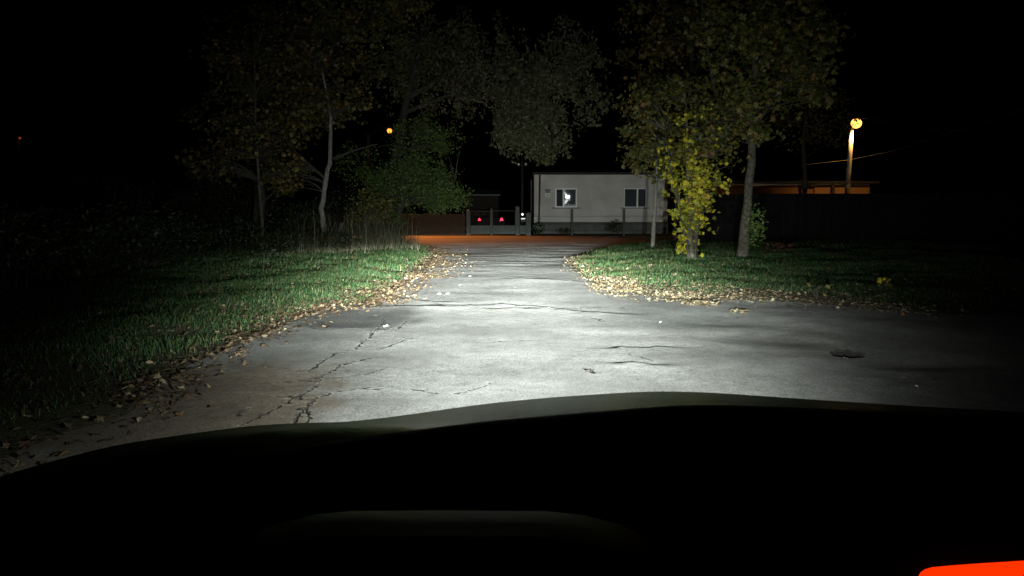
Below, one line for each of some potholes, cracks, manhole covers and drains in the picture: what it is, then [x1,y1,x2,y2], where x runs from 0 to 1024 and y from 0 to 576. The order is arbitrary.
pothole [829,348,867,358]
crack [515,305,630,321]
crack [236,319,413,427]
